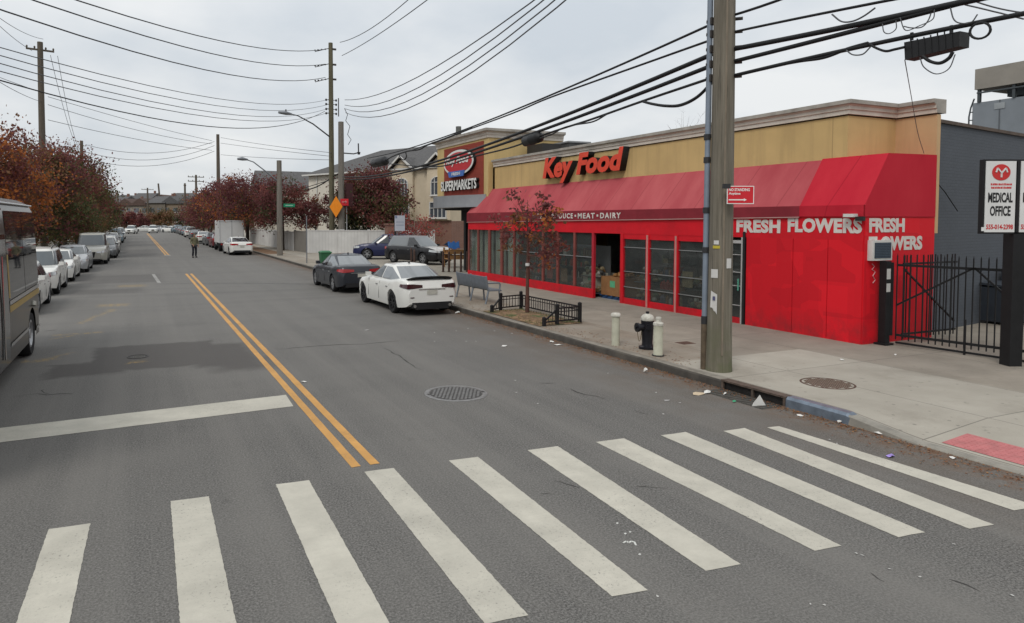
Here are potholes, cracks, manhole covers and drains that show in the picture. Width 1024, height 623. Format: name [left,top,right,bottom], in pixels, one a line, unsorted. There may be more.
manhole cover [424,385,488,402]
drain grate [703,378,792,410]
manhole cover [799,377,857,390]
